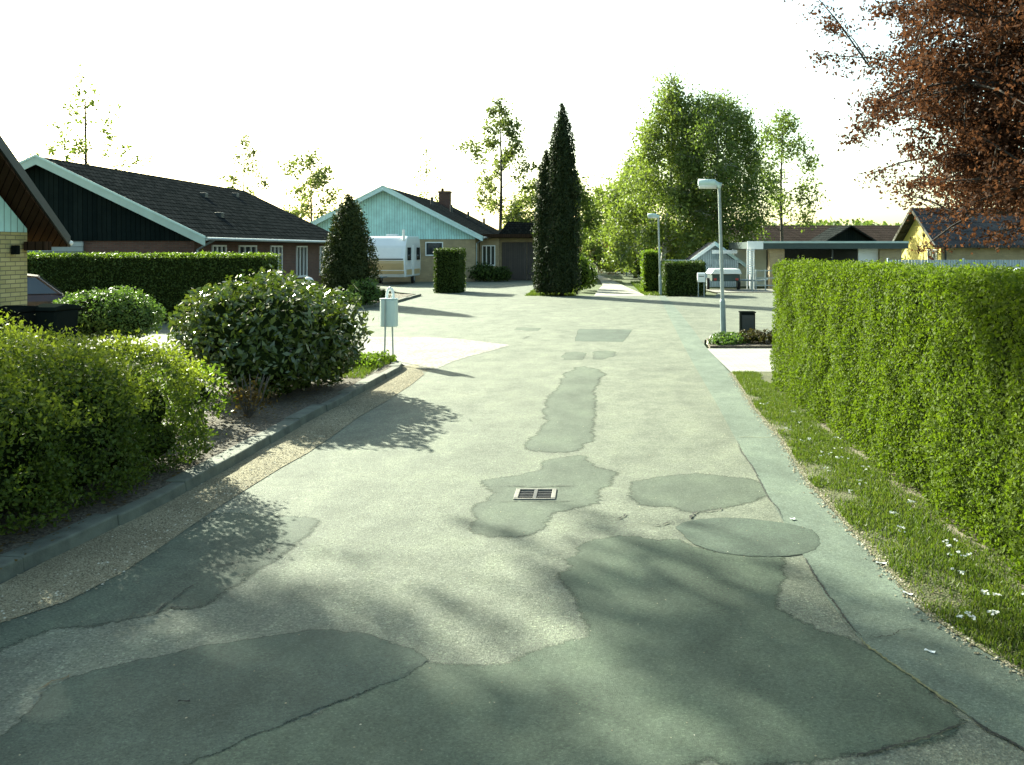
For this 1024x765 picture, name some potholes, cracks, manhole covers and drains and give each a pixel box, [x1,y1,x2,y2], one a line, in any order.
drain grate [513,488,557,500]
